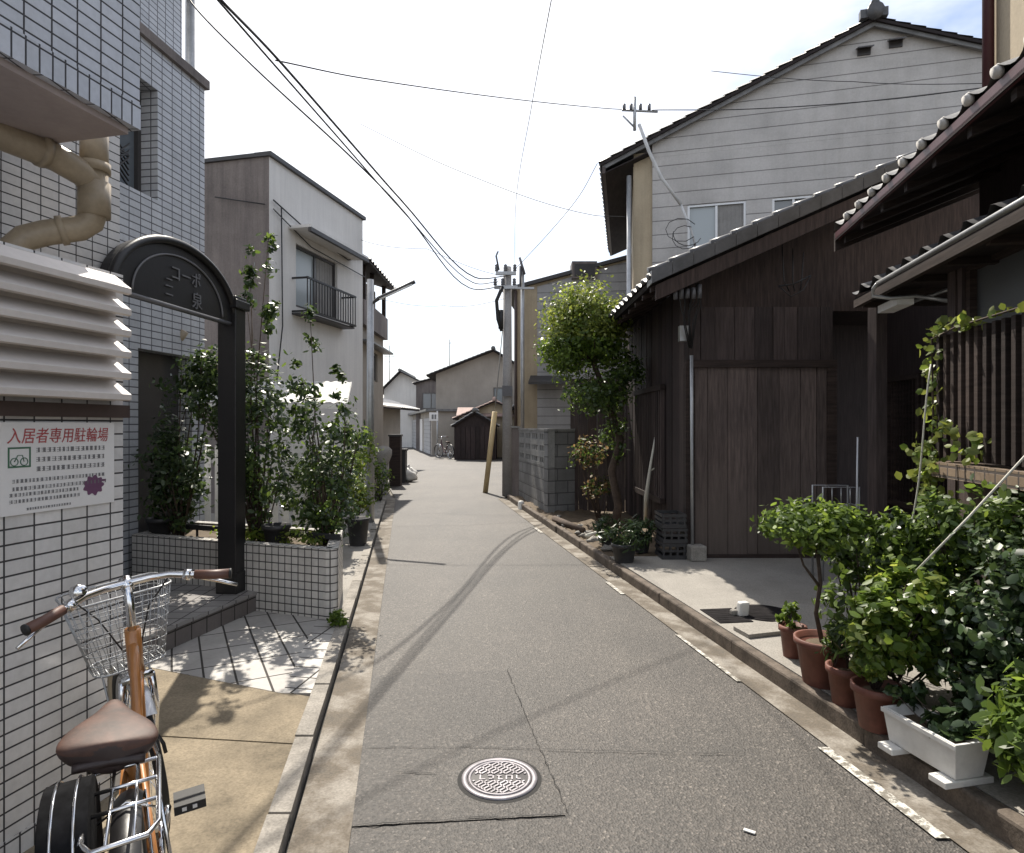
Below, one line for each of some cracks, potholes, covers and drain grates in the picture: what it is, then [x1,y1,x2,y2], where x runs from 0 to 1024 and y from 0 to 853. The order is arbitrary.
manhole cover [457,757,542,804]
